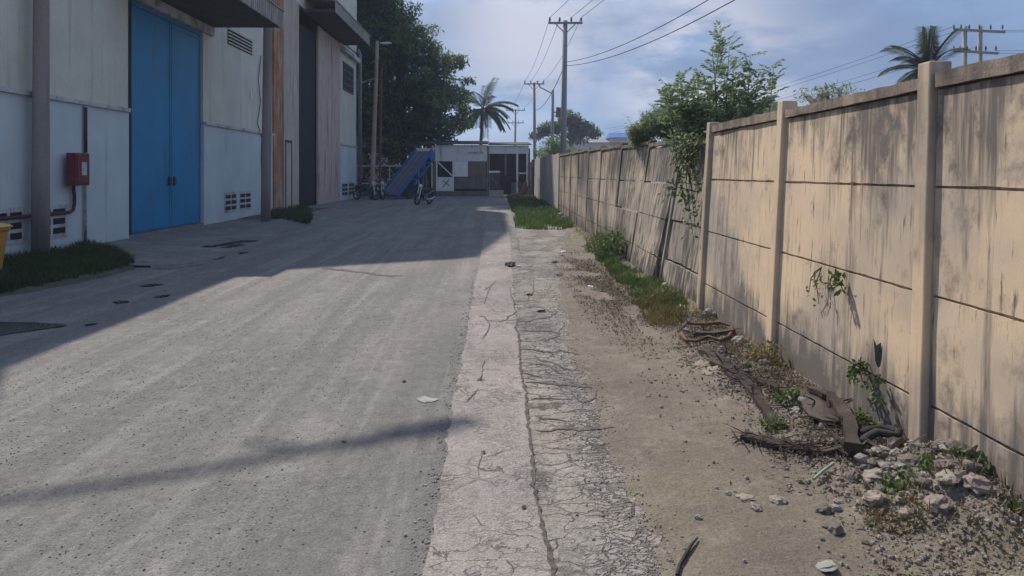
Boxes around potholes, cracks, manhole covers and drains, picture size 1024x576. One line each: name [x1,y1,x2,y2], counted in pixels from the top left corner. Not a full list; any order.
crack [321,267,402,276]
